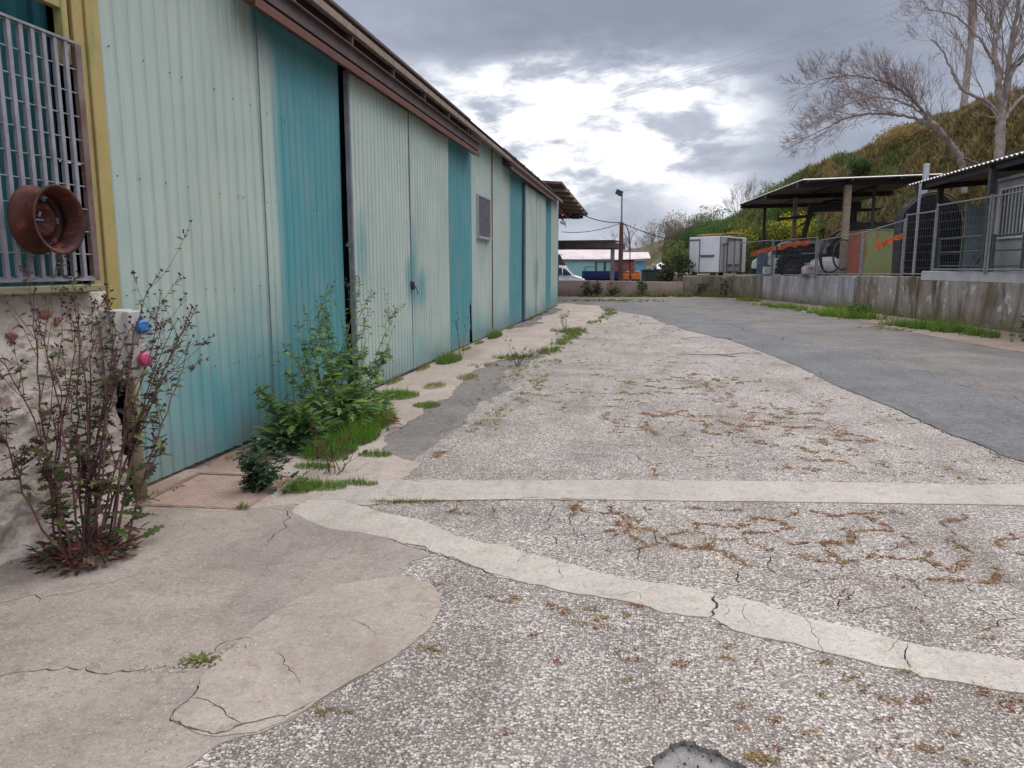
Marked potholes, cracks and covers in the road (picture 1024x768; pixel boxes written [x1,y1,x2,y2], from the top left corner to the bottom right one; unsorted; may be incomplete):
manhole cover [132,472,297,511]
crack [456,502,1014,631]
pothole [646,740,747,768]
